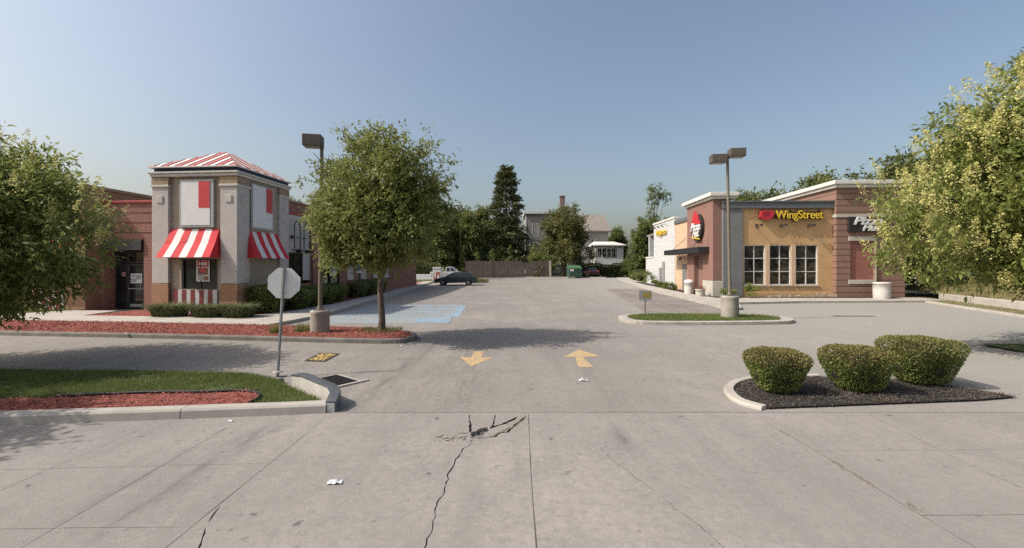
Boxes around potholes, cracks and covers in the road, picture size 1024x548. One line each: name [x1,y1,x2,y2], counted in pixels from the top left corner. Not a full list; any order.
crack [198,507,220,548]
crack [424,415,526,548]
